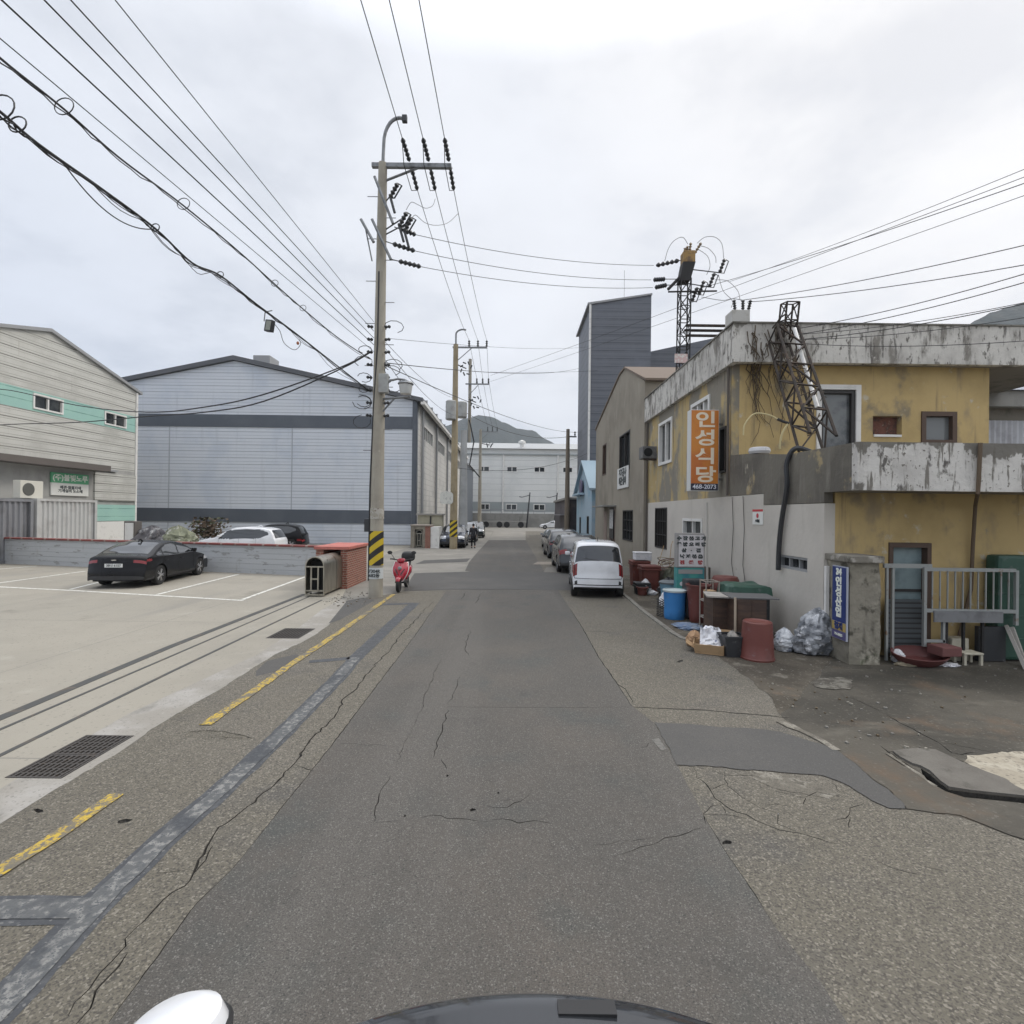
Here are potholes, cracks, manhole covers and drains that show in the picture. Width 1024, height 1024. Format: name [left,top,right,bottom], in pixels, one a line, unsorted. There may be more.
crack [68,607,428,1024]
drain grate [5,735,134,779]
drain grate [266,628,314,639]
crack [602,767,839,857]
crack [374,663,459,823]
crack [425,796,548,823]
